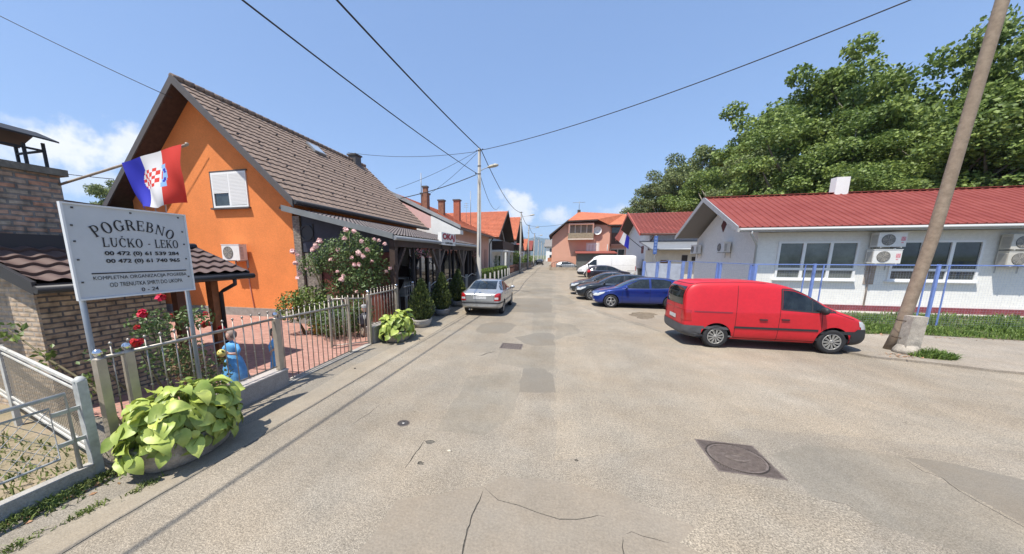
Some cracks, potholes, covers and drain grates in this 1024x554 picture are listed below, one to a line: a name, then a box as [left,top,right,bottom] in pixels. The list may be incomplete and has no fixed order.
manhole cover [695,439,787,480]
crack [462,487,607,554]
